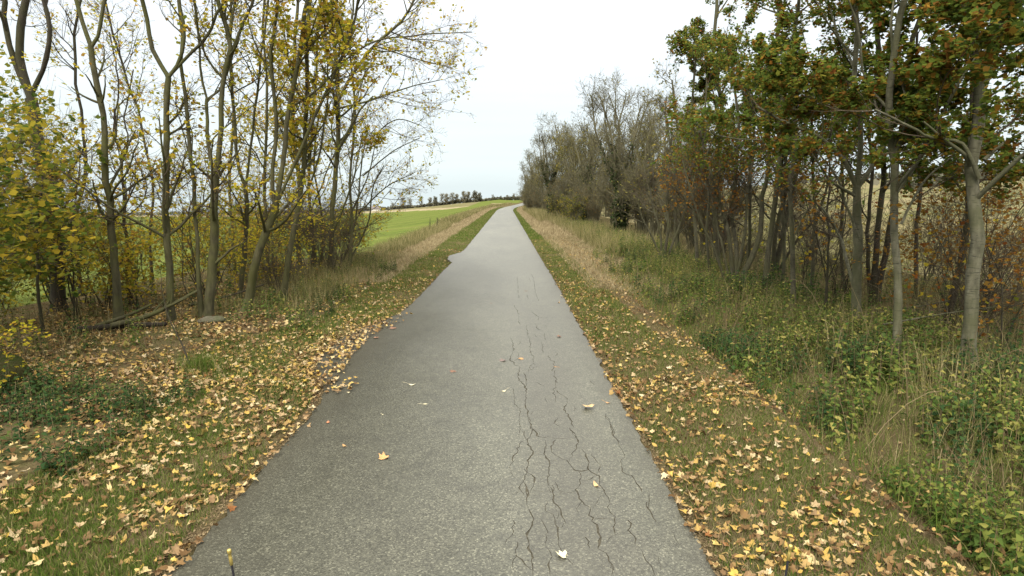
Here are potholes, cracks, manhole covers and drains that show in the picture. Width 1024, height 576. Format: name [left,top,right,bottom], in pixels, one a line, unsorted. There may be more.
crack [498,277,661,575]
